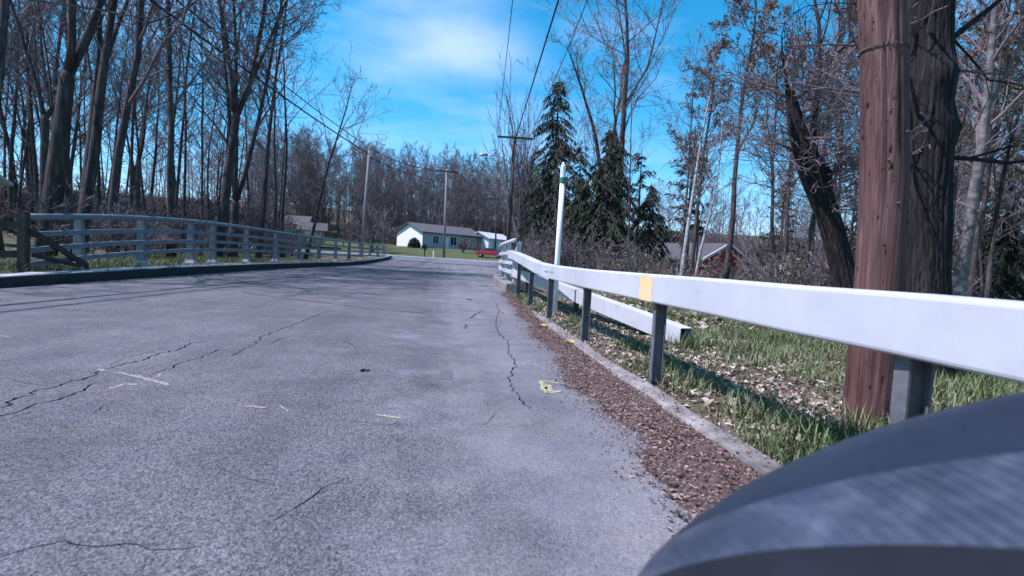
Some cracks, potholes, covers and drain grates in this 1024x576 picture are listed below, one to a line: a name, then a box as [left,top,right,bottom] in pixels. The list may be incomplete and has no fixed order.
crack [0,309,344,421]
crack [463,299,531,410]
crack [190,464,359,526]
crack [0,540,219,562]
